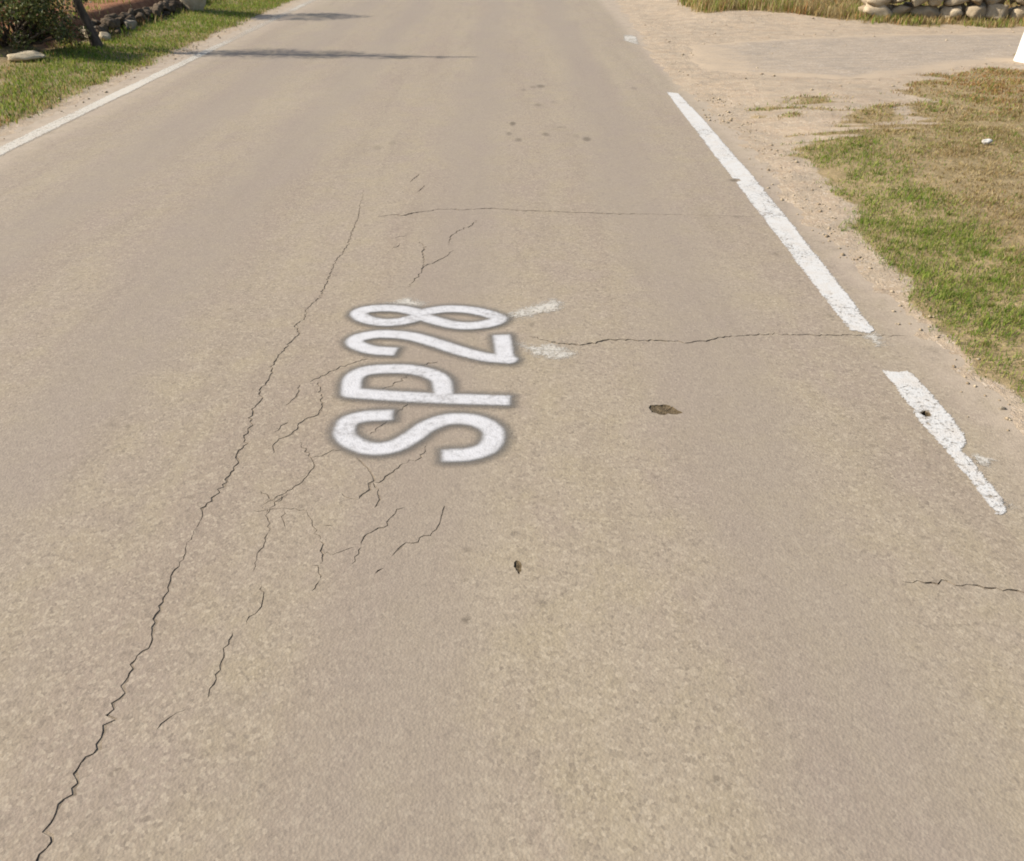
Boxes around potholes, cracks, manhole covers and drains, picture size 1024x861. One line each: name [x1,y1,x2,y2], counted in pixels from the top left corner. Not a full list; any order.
crack [36,190,445,861]
crack [530,333,904,346]
crack [907,579,1024,593]
crack [379,208,756,288]
pothole [649,404,682,415]
